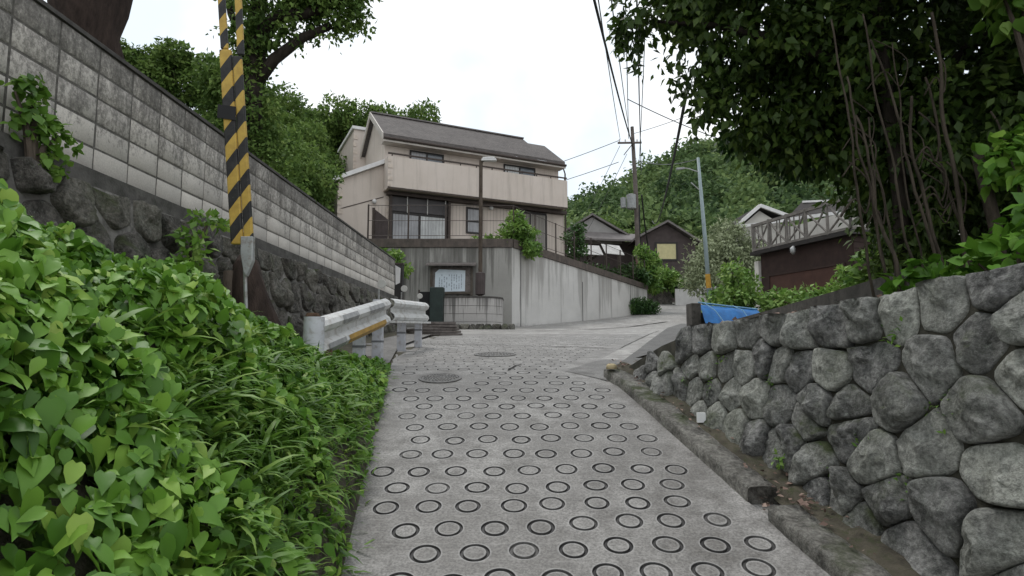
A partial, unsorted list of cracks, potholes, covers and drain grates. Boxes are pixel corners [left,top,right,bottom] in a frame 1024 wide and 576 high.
manhole cover [418,373,462,384]
